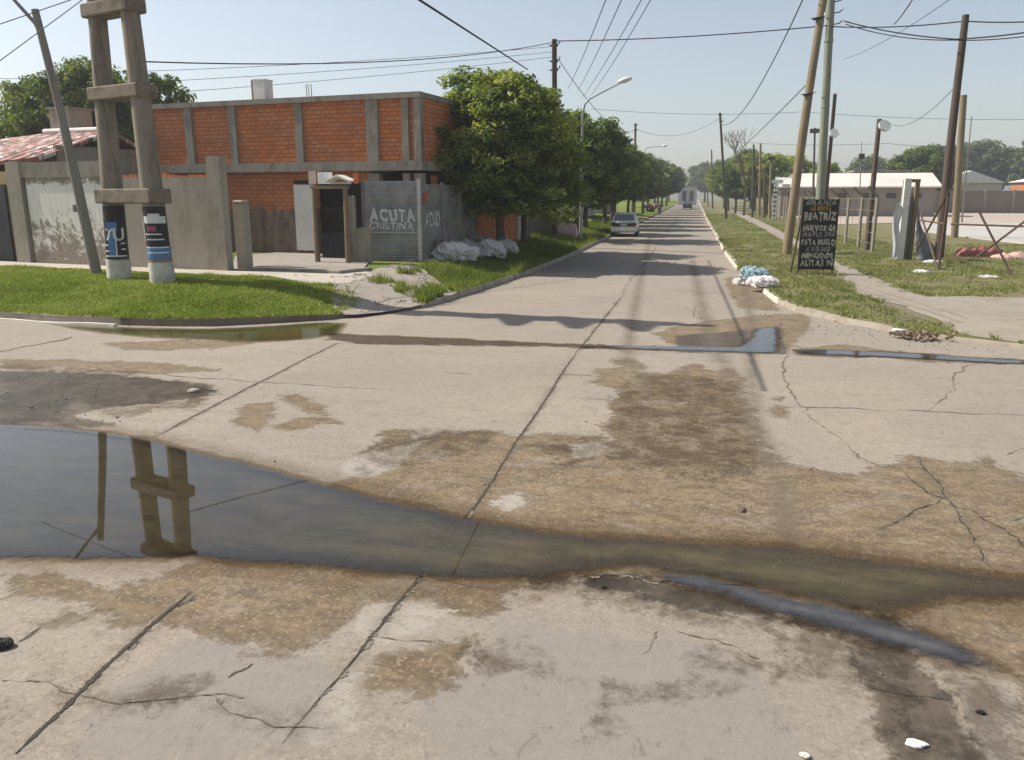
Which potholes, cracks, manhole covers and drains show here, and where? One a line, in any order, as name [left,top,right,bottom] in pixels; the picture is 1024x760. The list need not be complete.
crack [781,354,1024,569]
crack [2,663,324,729]
